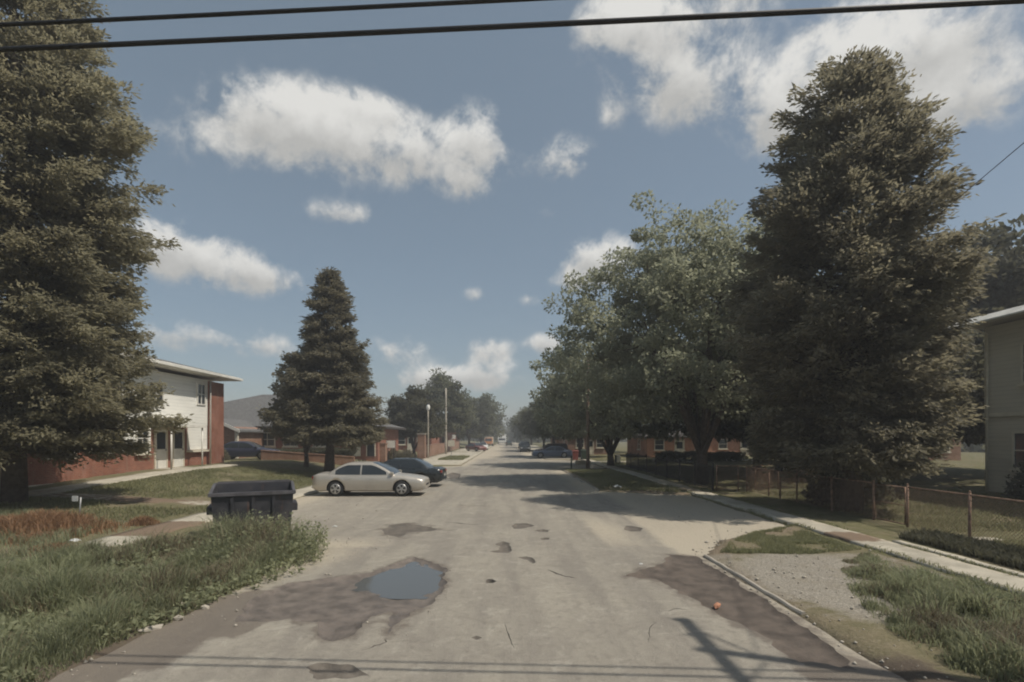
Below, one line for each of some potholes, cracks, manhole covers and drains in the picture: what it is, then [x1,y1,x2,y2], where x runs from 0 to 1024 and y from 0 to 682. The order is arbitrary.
pothole [490,541,512,553]
pothole [234,557,448,641]
